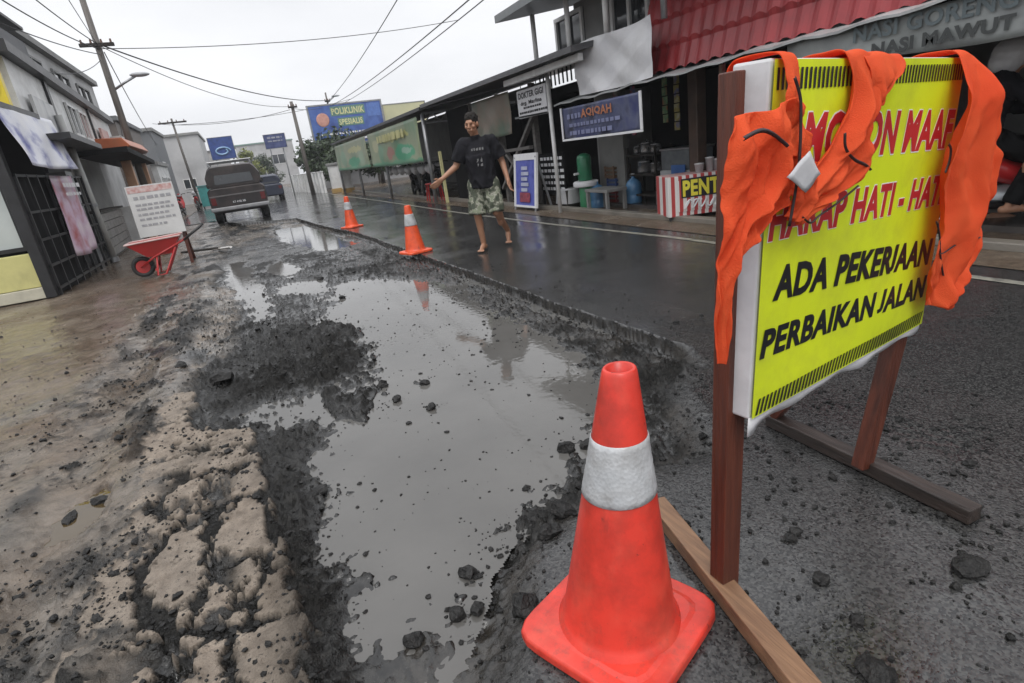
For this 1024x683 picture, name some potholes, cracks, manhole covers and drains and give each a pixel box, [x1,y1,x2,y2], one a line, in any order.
pothole [207,255,289,327]
pothole [267,222,367,252]
pothole [254,256,312,279]
pothole [196,269,672,683]
